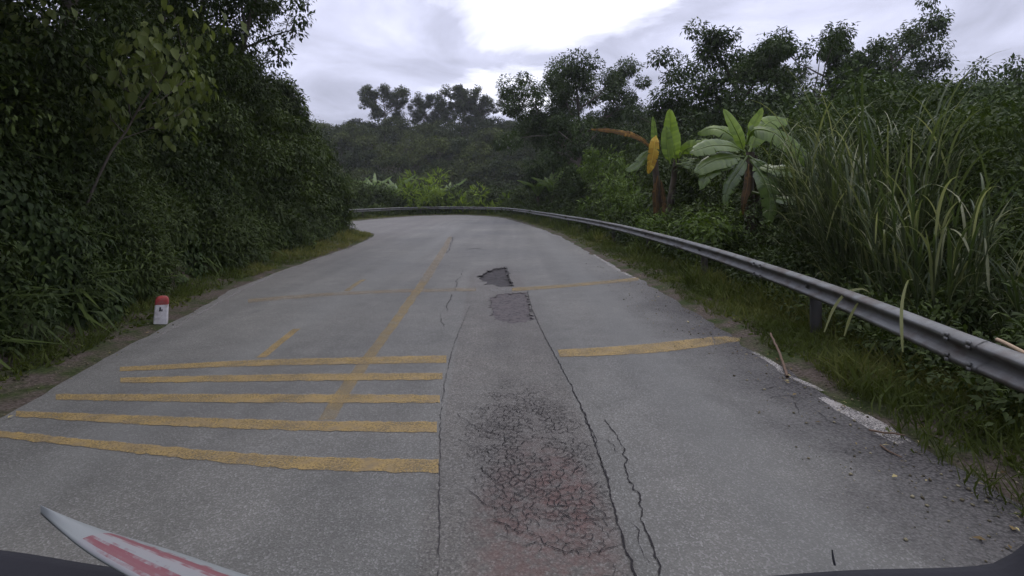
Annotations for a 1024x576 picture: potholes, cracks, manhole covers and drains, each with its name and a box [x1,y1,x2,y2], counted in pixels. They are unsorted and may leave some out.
crack [458,267,661,576]
pothole [477,266,513,287]
